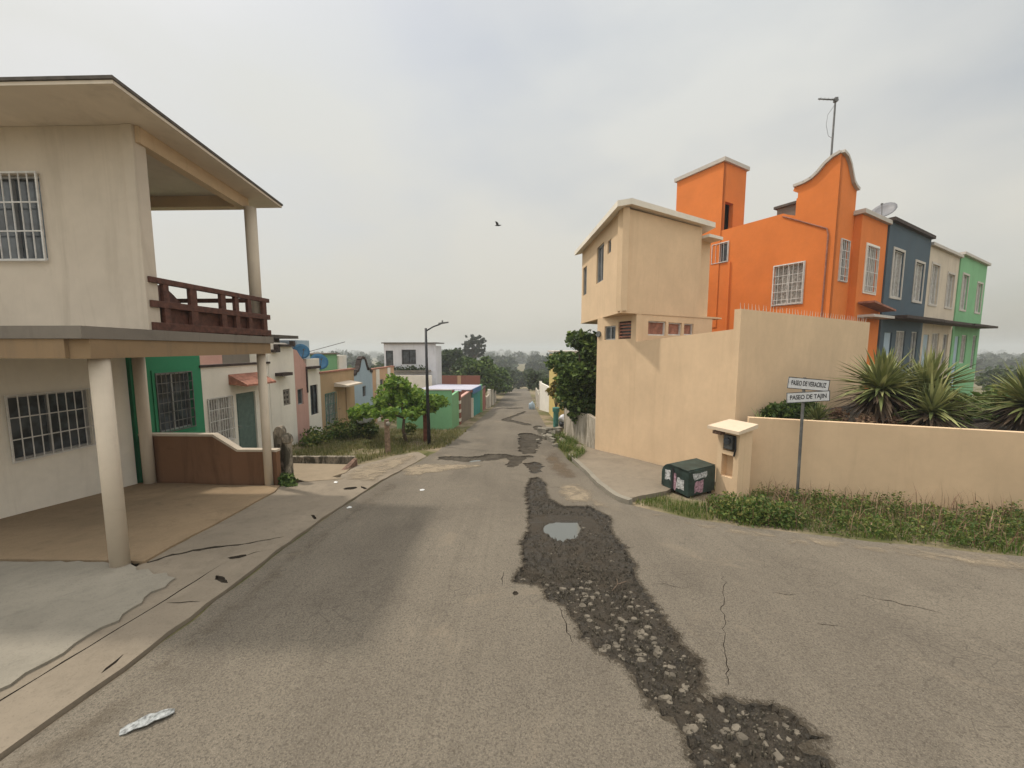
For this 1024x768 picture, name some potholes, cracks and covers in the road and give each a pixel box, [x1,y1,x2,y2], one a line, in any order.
pothole [517,433,543,454]
pothole [522,462,545,474]
crack [720,579,729,685]
crack [131,536,284,566]
pothole [513,477,832,768]
pothole [437,454,536,467]
